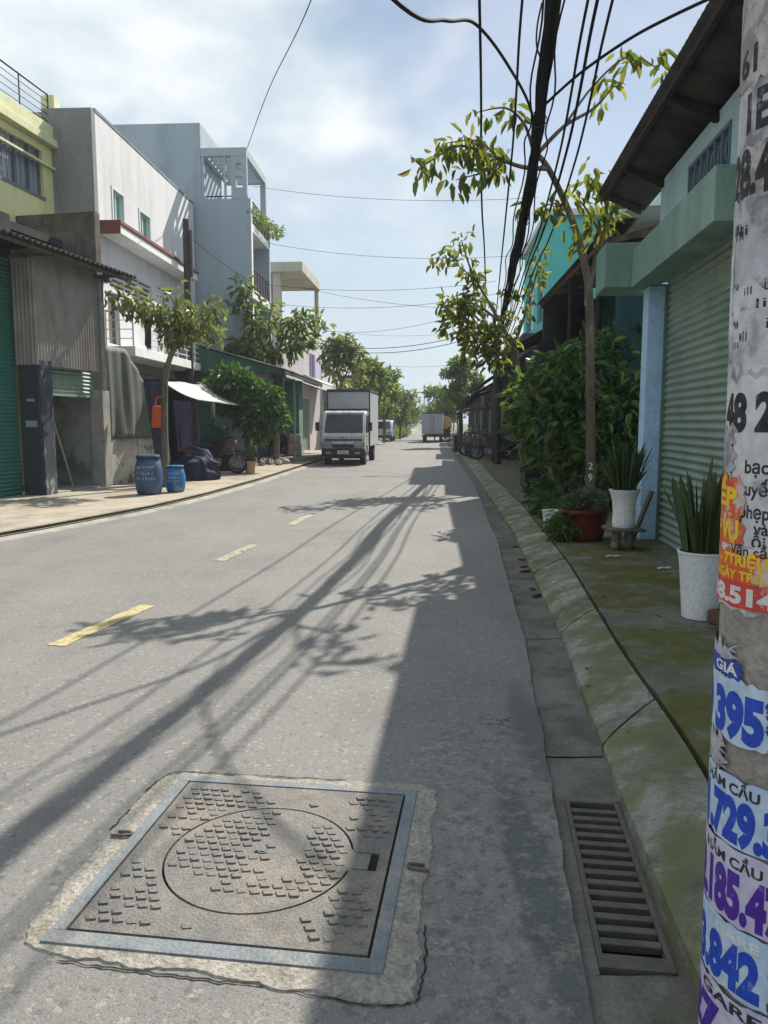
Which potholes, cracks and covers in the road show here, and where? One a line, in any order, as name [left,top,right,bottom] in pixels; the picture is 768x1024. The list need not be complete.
drain grate [564,799,677,976]
manhole cover [24,772,438,1004]
